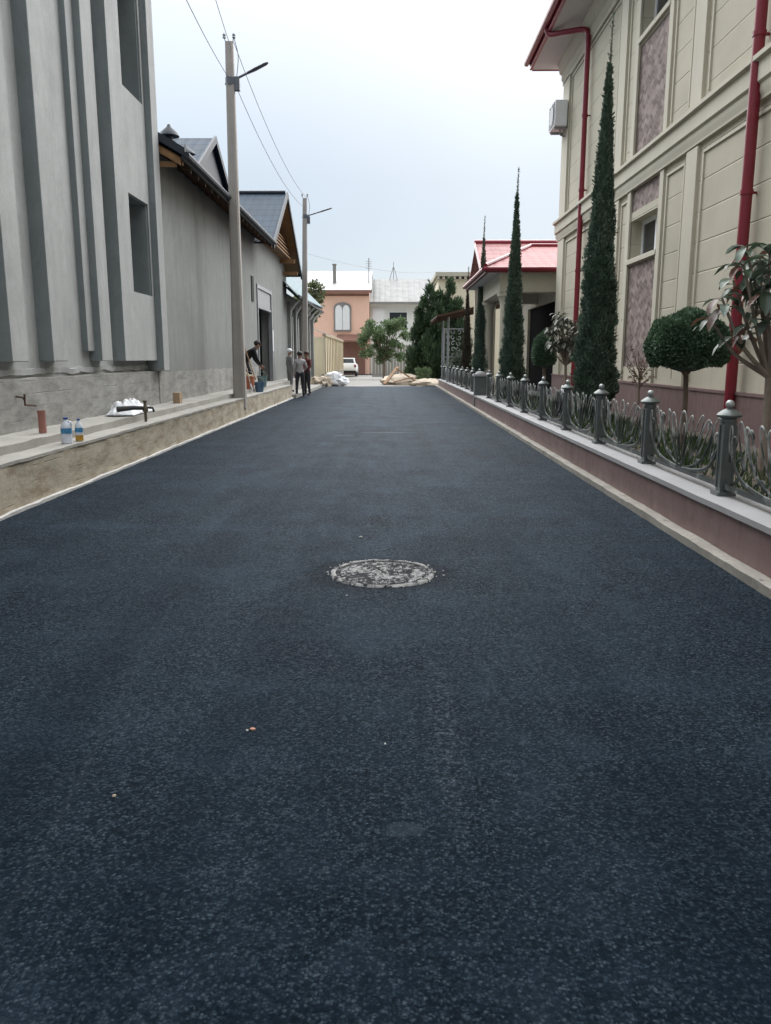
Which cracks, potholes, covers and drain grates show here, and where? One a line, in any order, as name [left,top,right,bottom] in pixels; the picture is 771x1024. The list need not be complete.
manhole cover [327,559,445,588]
